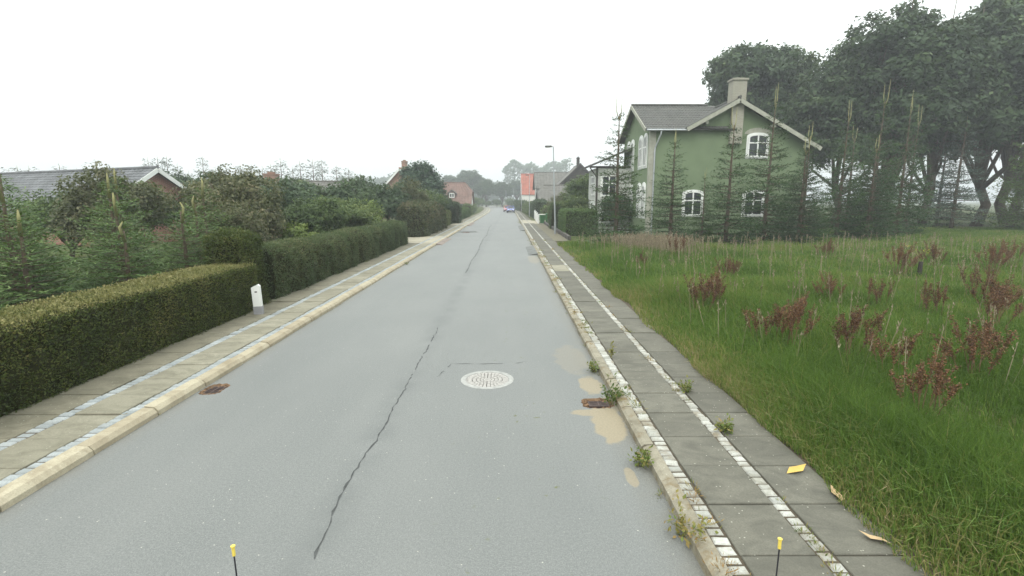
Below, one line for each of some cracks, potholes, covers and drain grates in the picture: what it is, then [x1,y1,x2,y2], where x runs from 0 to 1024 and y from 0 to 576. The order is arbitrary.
crack [314,328,527,559]
drain grate [198,383,230,395]
drain grate [581,398,614,409]
manhole cover [461,371,514,389]
